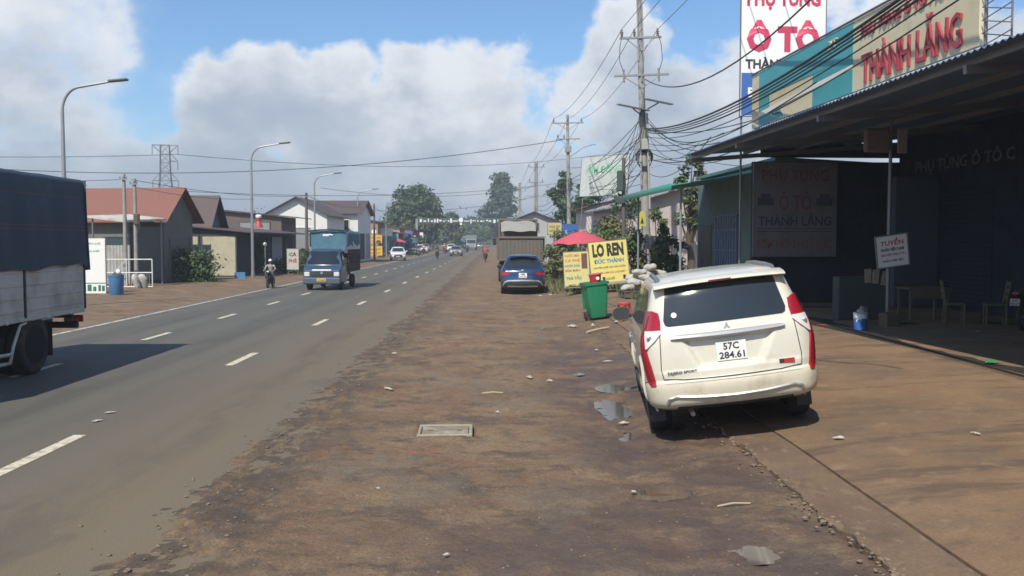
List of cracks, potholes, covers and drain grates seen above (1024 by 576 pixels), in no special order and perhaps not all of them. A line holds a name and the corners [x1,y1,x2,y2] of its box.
pothole [634,486,692,502]
manhole cover [417,424,473,437]
